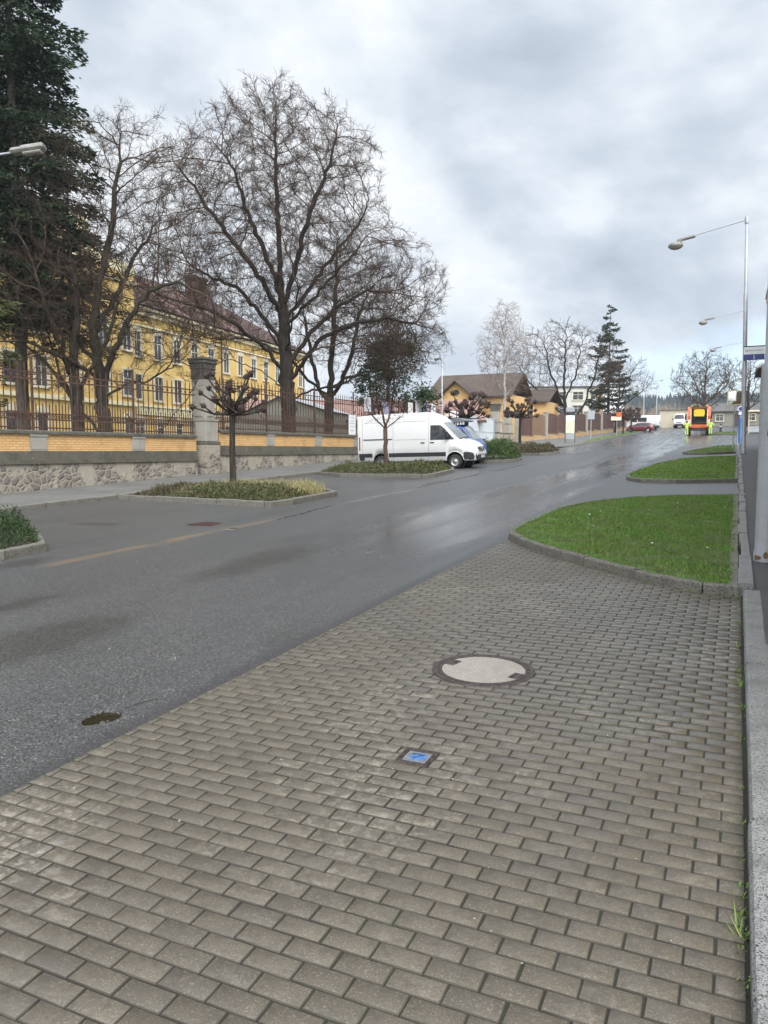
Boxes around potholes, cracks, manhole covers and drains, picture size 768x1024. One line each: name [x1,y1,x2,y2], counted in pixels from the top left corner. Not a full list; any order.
manhole cover [432,654,535,688]
utility cover [394,747,440,768]
